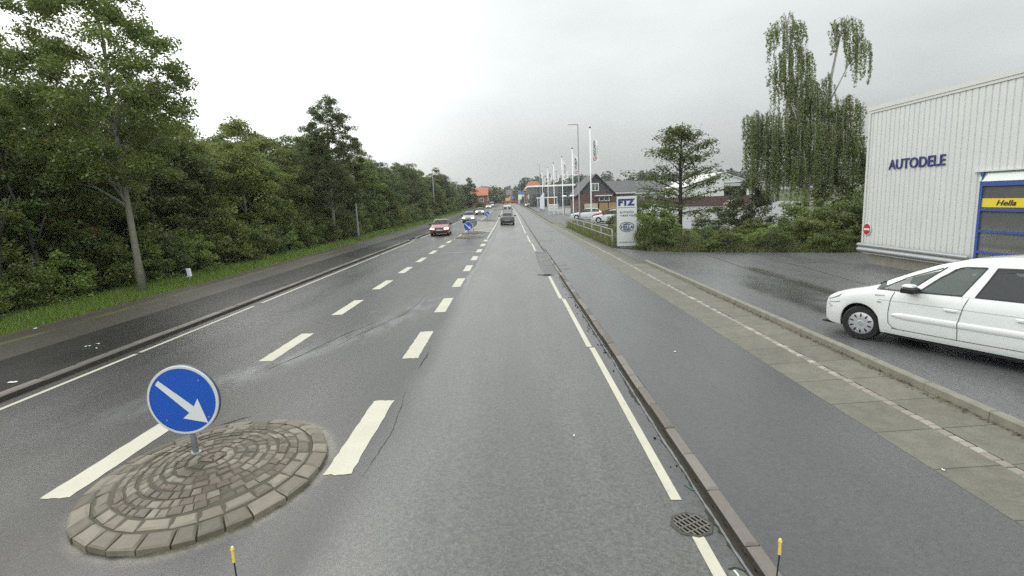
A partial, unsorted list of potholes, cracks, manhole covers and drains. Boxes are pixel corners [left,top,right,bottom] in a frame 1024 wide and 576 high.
crack [272,299,422,368]
drain grate [670,512,713,538]
